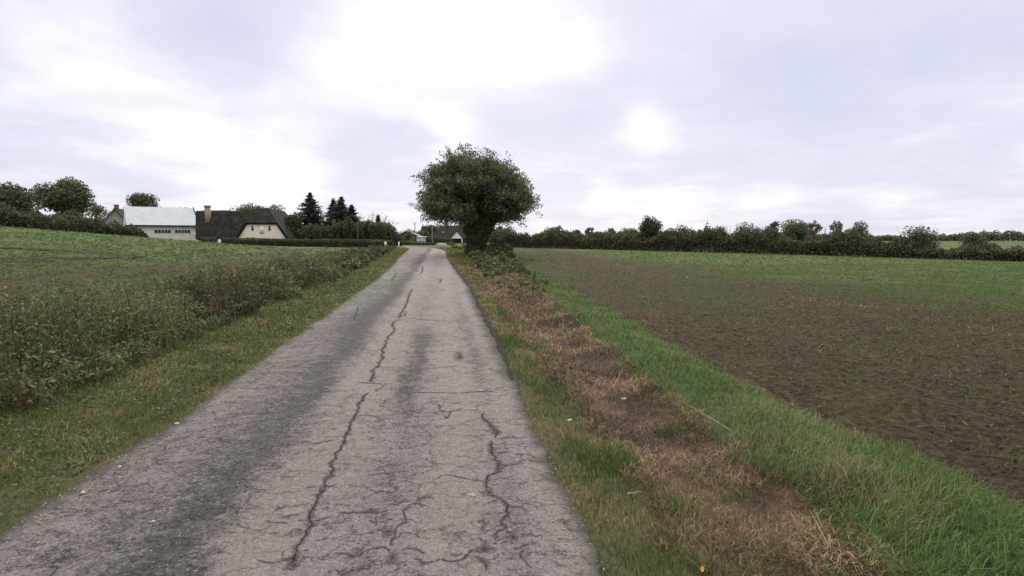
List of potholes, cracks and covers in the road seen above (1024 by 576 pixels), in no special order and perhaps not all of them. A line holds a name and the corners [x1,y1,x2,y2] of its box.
crack [257,272,544,570]
